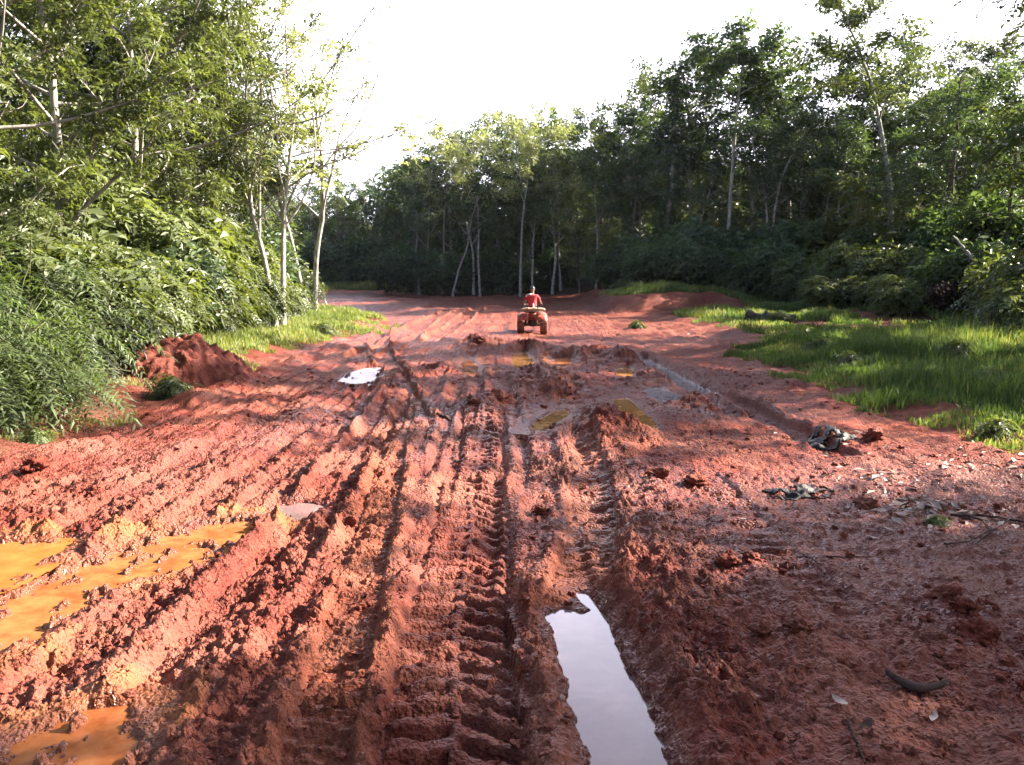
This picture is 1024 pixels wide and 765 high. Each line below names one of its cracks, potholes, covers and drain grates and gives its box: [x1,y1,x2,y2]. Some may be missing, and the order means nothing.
pothole [637,352,726,398]
pothole [536,587,690,765]
pothole [610,361,643,377]
pothole [524,406,576,433]
pothole [506,339,541,369]
pothole [0,685,156,765]
pothole [608,396,670,432]
pothole [546,349,583,367]
pothole [0,511,263,658]
